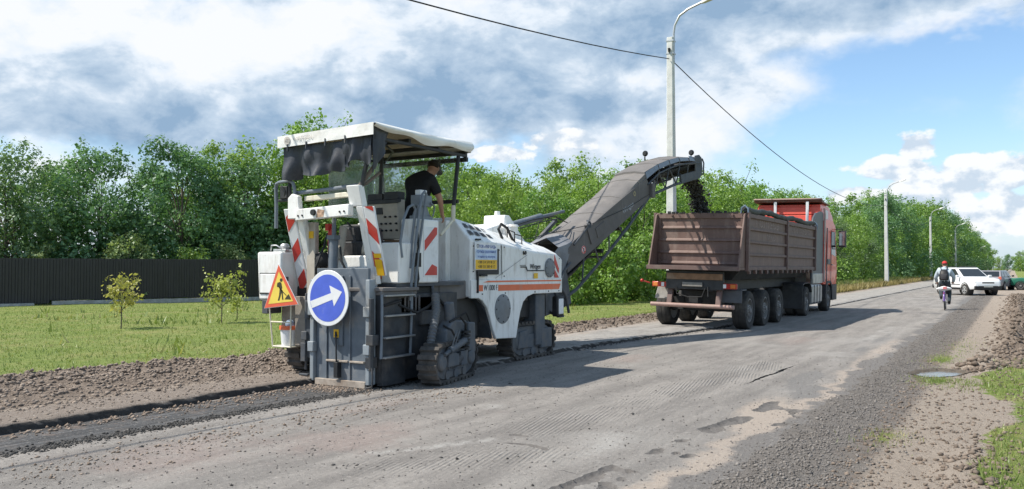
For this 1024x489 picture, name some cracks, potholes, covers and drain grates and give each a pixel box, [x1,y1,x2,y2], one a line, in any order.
pothole [698,416,754,434]
pothole [751,401,805,419]
pothole [906,368,970,378]
crack [747,365,796,384]
